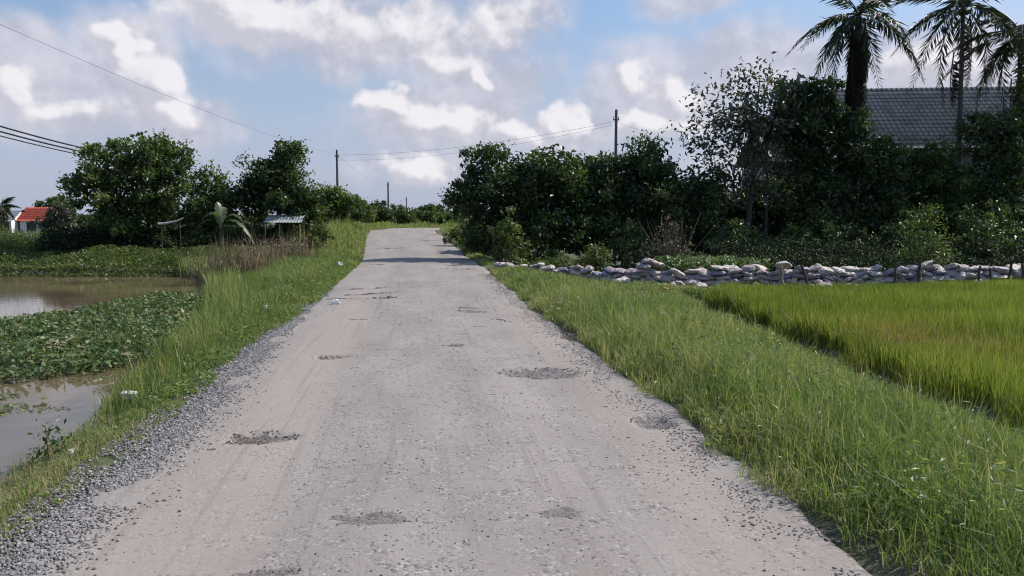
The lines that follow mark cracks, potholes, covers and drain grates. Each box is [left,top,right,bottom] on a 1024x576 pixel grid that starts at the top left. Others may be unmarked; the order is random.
pothole [495,367,588,380]
pothole [226,429,303,445]
pothole [231,567,303,576]
pothole [630,414,679,430]
pothole [538,506,583,519]
pothole [330,511,420,526]
